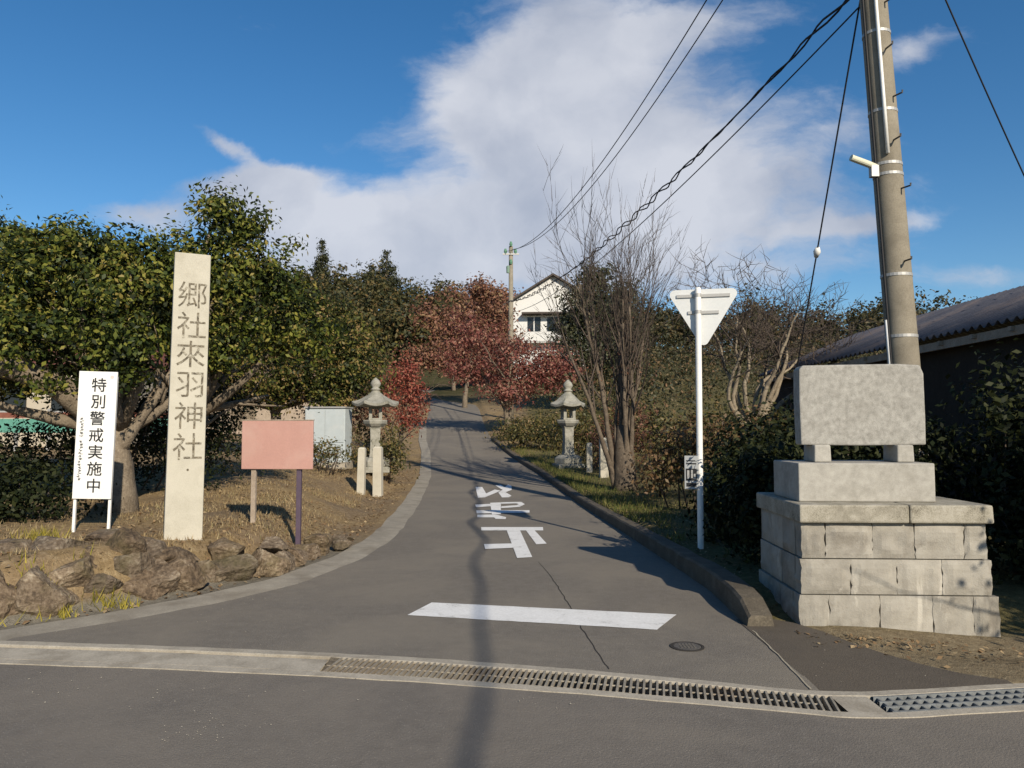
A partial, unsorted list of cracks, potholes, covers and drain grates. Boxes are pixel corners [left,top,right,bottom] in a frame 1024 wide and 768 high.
crack [541,565,609,669]
drain grate [324,658,841,712]
drain grate [872,688,1024,712]
manhole cover [670,641,705,652]
